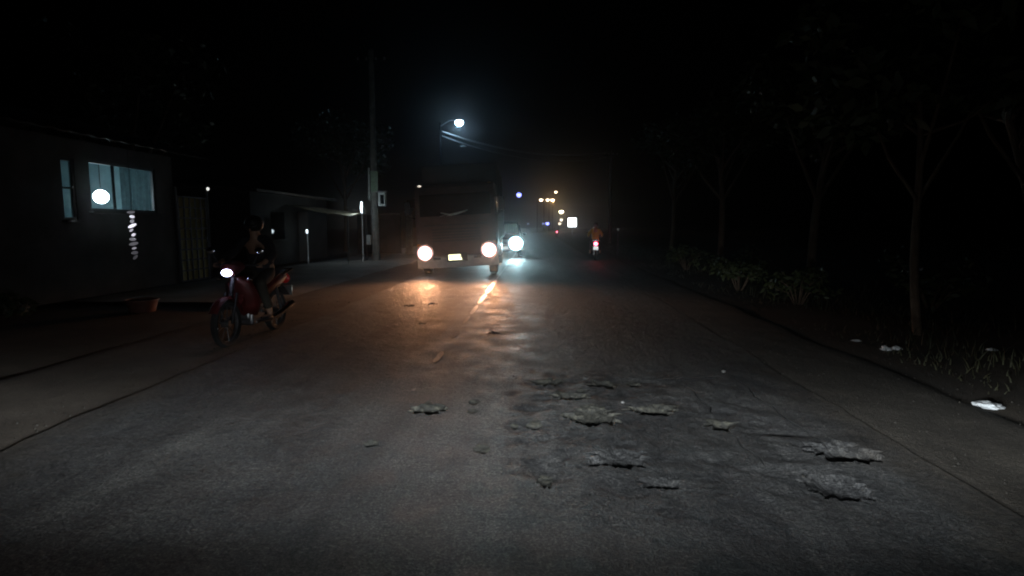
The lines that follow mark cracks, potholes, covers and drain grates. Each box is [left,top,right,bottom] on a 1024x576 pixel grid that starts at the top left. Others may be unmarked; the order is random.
pothole [702,418,739,433]
pothole [547,390,591,401]
pothole [583,380,620,389]
crack [649,375,765,466]
pothole [536,475,555,489]
pothole [794,470,877,502]
pothole [619,404,682,416]
pothole [584,446,653,470]
pothole [407,401,450,415]
pothole [795,439,884,465]
pothole [529,378,564,387]
pothole [558,403,623,427]
